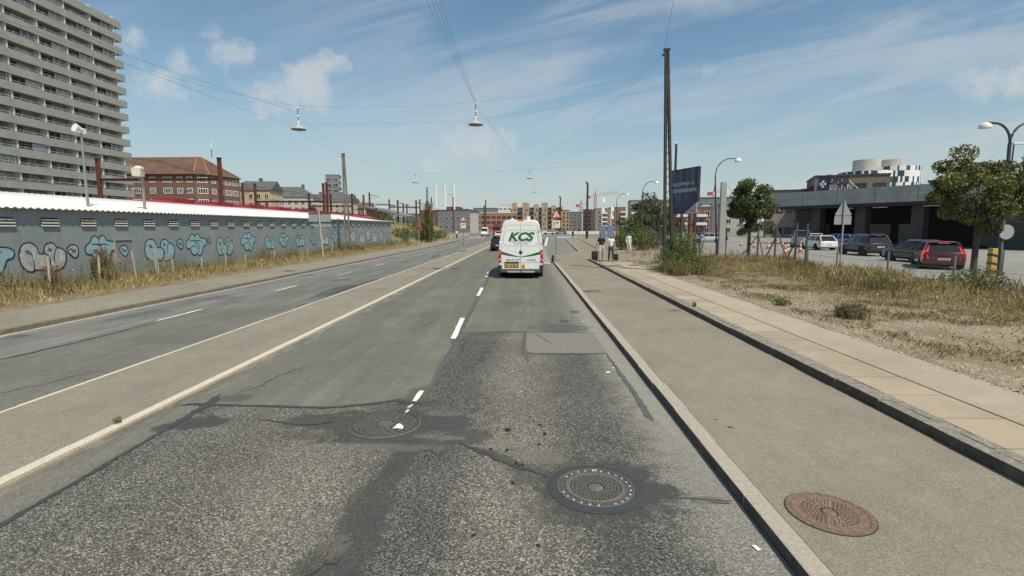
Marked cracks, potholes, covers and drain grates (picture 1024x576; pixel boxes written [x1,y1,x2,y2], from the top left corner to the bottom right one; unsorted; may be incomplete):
manhole cover [784,492,879,537]
manhole cover [547,465,645,514]
manhole cover [348,411,421,439]
